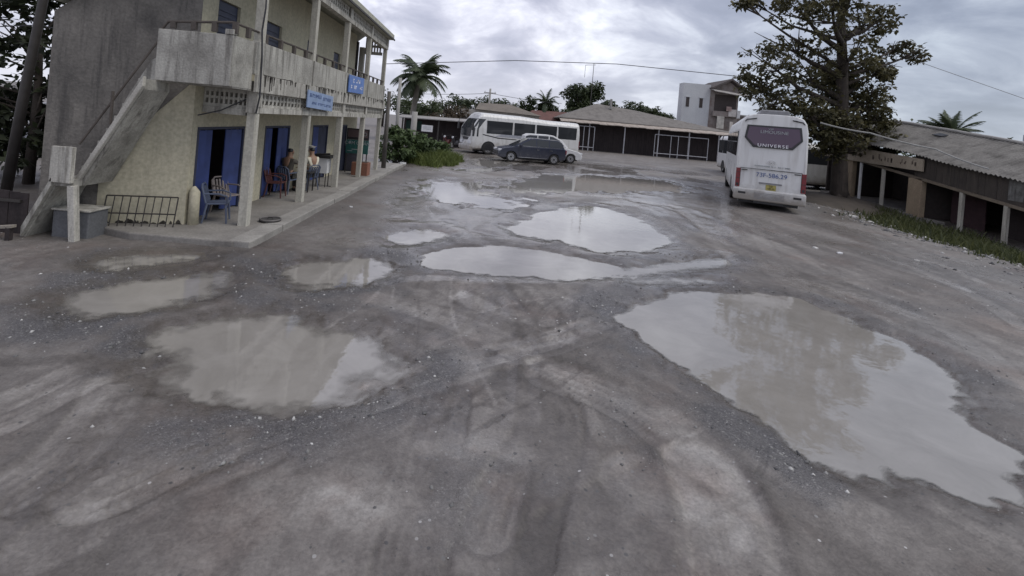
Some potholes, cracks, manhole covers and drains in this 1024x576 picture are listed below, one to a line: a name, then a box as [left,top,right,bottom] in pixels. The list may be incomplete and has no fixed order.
pothole [401,178,540,213]
pothole [71,247,224,277]
pothole [595,284,1024,521]
pothole [94,301,432,432]
pothole [255,252,407,293]
pothole [401,239,622,283]
pothole [370,225,460,247]
pothole [499,203,686,256]
pothole [489,172,697,196]
pothole [12,264,258,331]
